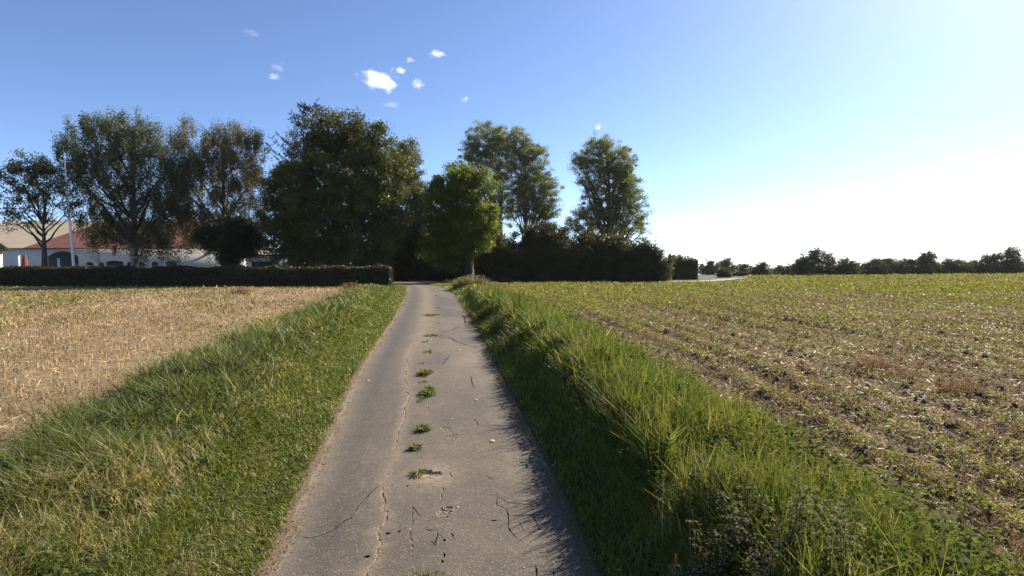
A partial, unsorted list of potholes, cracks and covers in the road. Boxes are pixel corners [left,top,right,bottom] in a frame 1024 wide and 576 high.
crack [409,506,455,558]
crack [483,476,539,540]
pothole [414,469,443,479]
crack [304,321,429,576]
